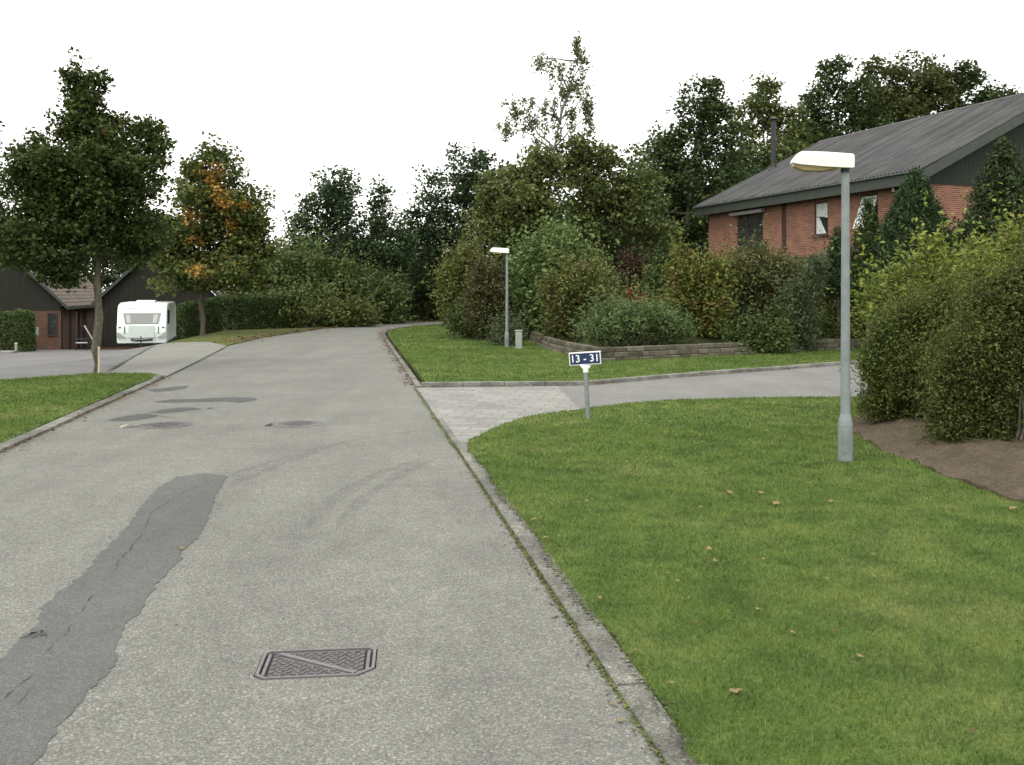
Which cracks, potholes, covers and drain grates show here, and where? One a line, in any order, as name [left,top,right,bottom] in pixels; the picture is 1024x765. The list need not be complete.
manhole cover [255,647,377,680]
